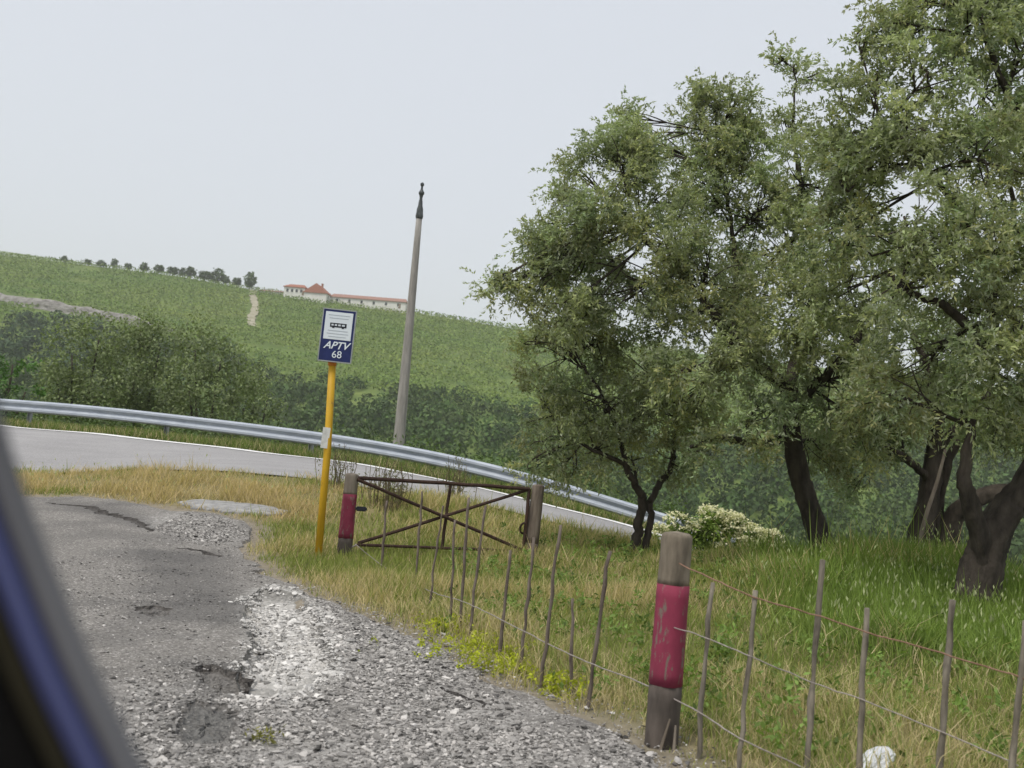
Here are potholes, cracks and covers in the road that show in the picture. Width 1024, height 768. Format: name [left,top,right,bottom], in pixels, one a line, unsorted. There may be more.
pothole [171,699,240,744]
crack [177,548,222,557]
pothole [134,605,173,617]
crack [51,503,155,532]
pothole [191,664,254,695]
